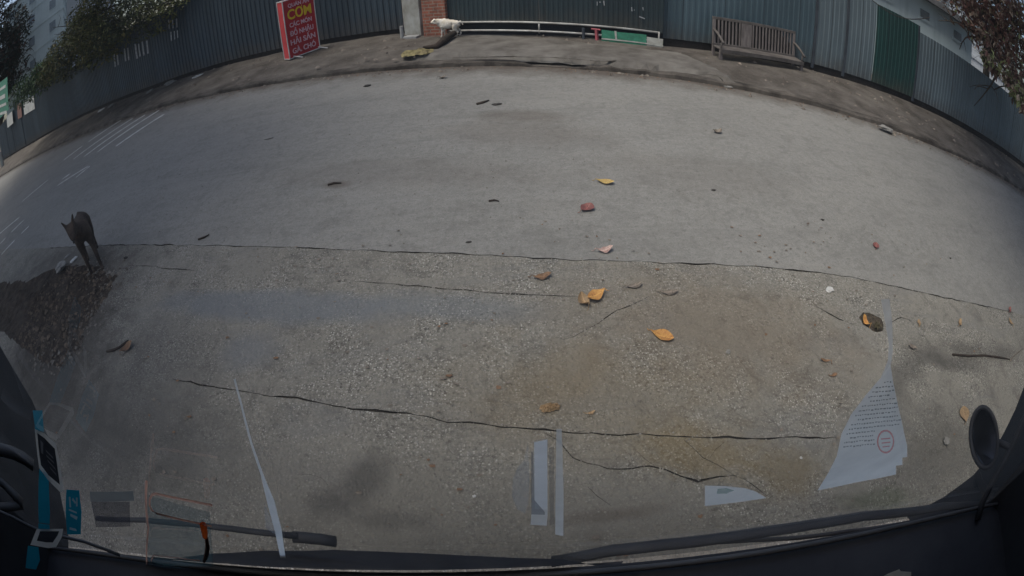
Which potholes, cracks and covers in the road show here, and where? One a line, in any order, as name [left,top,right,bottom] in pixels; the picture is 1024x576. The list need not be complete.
crack [54,244,968,505]
pothole [859,312,883,332]
